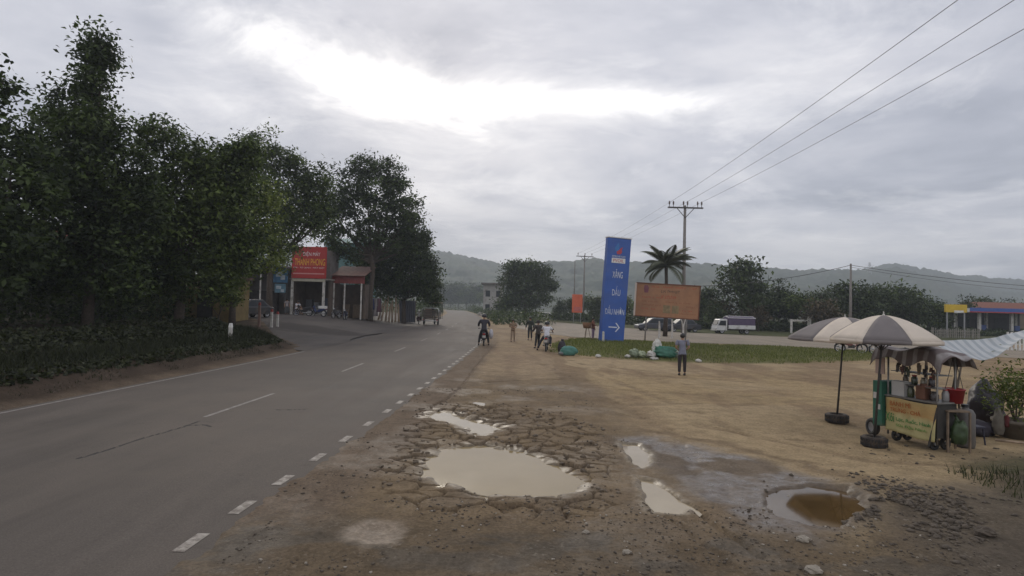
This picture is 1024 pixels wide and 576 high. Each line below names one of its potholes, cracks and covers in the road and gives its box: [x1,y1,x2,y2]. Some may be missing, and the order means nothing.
pothole [632,475,702,521]
pothole [617,441,654,469]
pothole [759,481,880,530]
crack [364,342,628,524]
pothole [420,409,513,437]
pothole [412,443,592,501]
